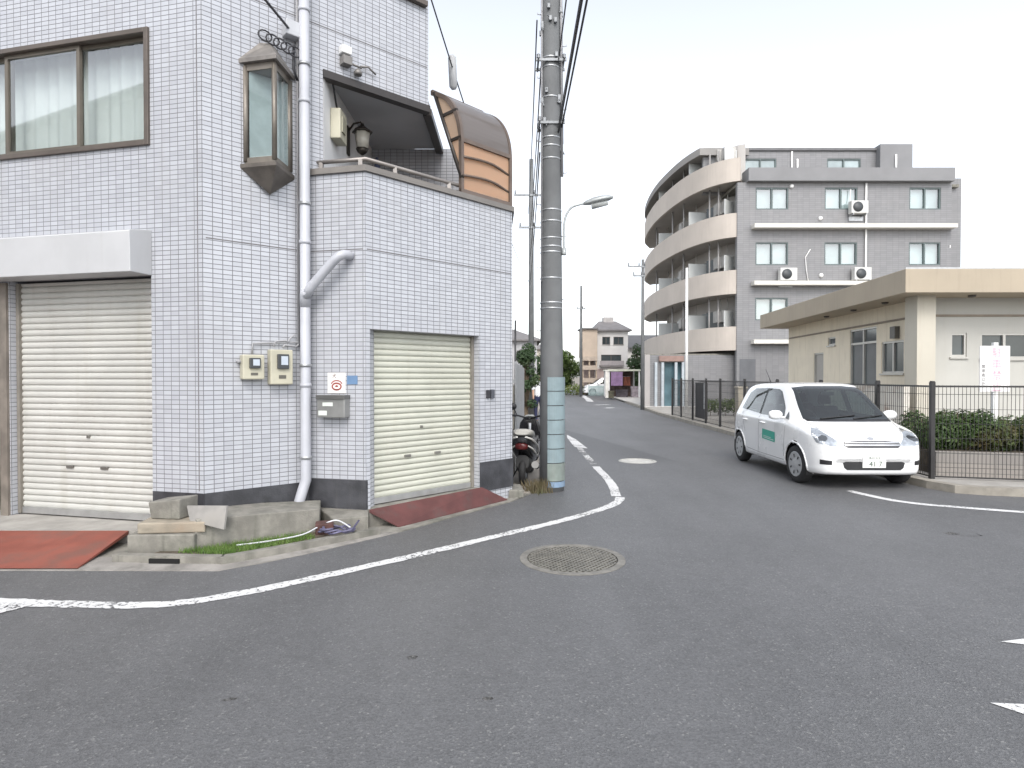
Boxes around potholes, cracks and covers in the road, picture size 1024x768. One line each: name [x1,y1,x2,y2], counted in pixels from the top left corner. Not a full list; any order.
manhole cover [520,544,626,576]
